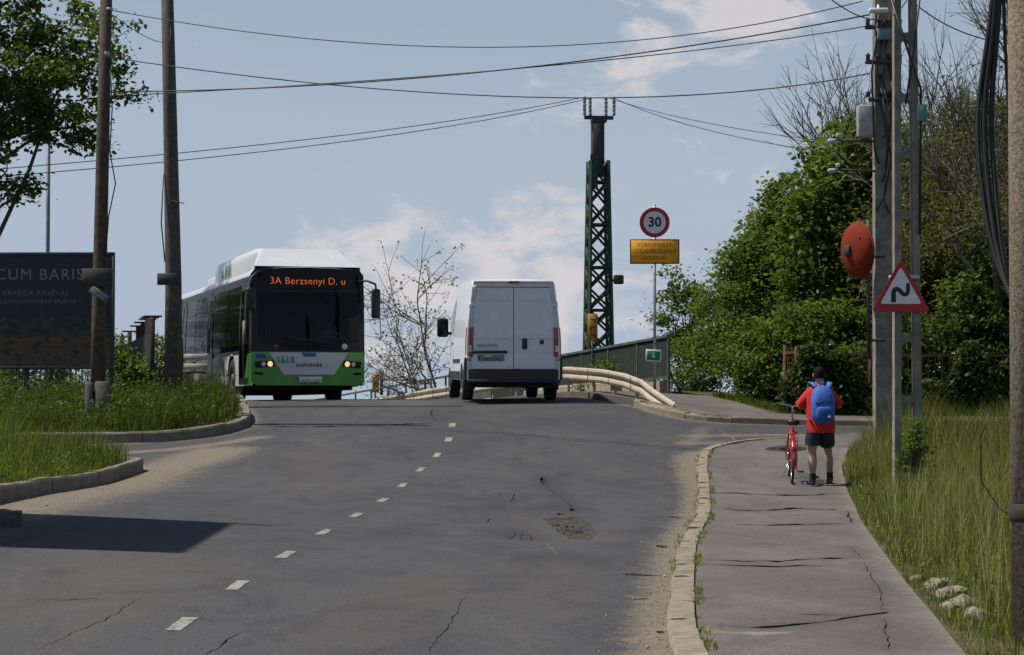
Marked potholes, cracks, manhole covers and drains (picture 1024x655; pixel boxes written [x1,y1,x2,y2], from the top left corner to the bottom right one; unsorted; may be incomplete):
crack [716,612,889,628]
crack [712,543,840,567]
crack [429,598,465,654]
crack [509,529,557,553]
crack [724,493,853,526]
